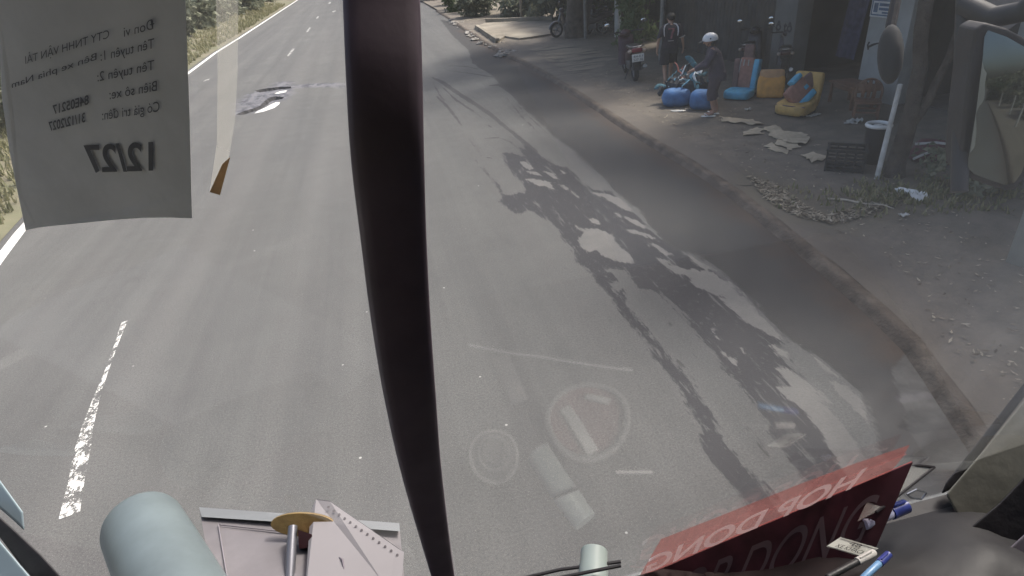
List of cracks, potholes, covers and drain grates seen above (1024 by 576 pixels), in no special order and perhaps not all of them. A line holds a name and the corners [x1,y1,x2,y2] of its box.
pothole [237,96,284,115]
